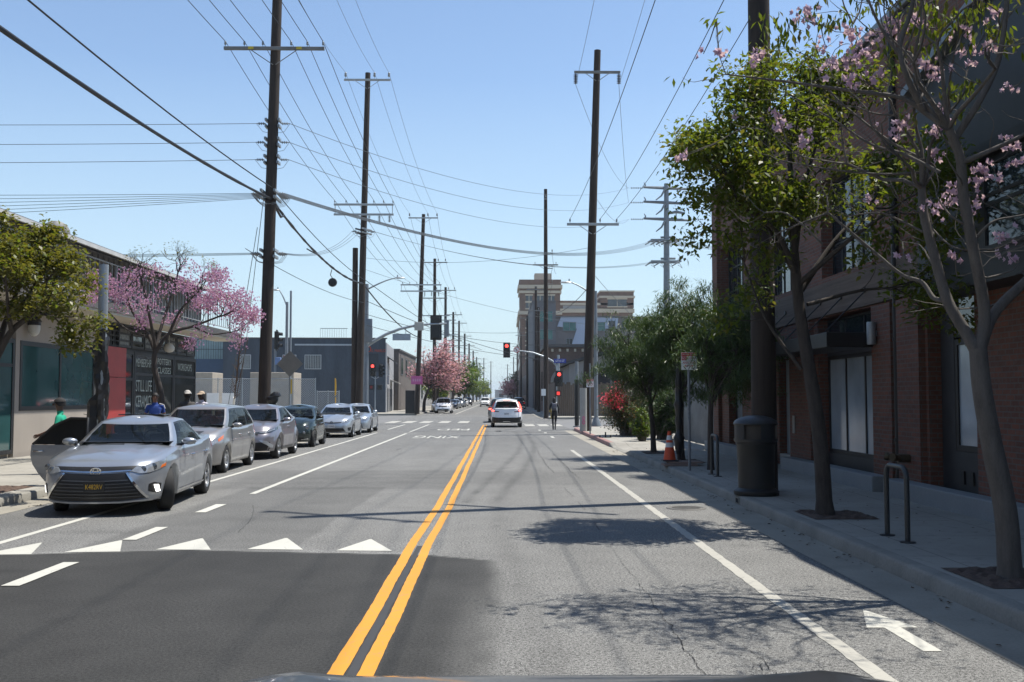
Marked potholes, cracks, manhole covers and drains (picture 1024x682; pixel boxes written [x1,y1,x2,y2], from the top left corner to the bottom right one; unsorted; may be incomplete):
crack [537,450,707,675]
